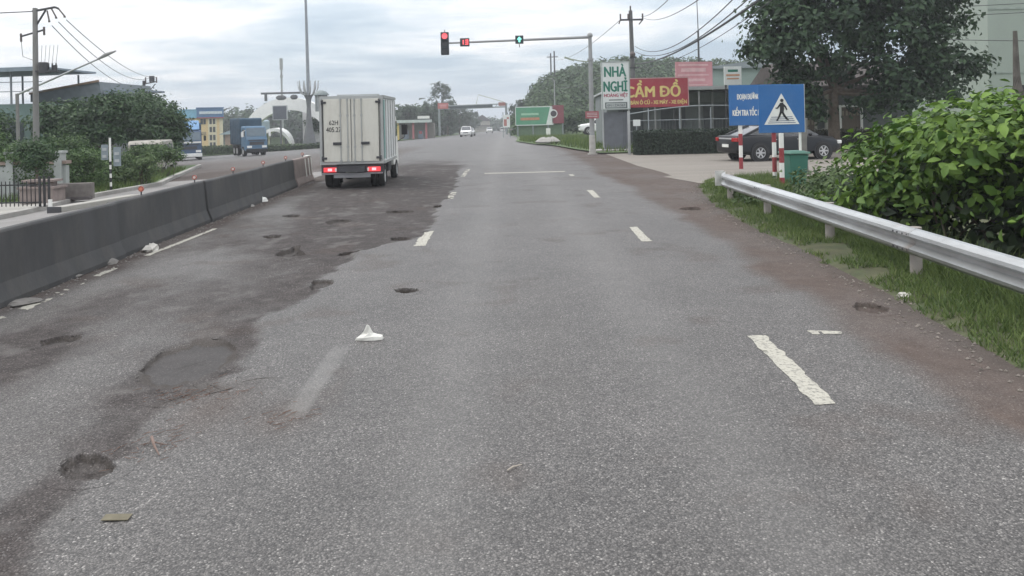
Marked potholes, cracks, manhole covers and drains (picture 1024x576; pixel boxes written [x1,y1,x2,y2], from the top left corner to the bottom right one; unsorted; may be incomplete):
pothole [301,278,343,293]
pothole [269,245,310,259]
pothole [385,286,429,296]
pothole [331,250,367,258]
pothole [124,335,252,393]
pothole [841,300,902,317]
pothole [37,447,134,490]
pothole [26,332,95,350]
